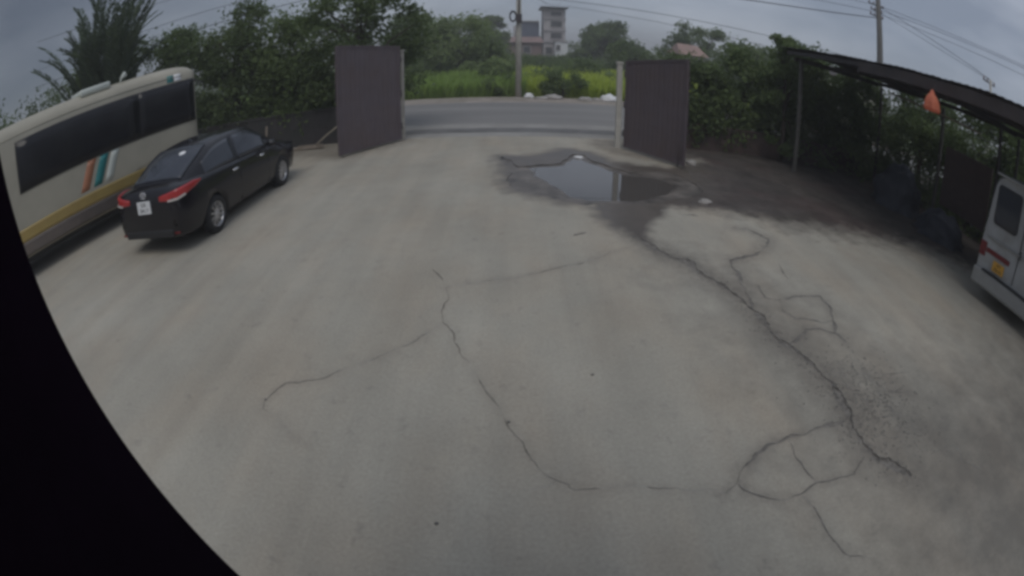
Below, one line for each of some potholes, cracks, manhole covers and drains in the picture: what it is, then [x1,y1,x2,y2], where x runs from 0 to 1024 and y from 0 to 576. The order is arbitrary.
crack [263,252,720,491]
pothole [500,154,703,206]
crack [633,228,911,557]
